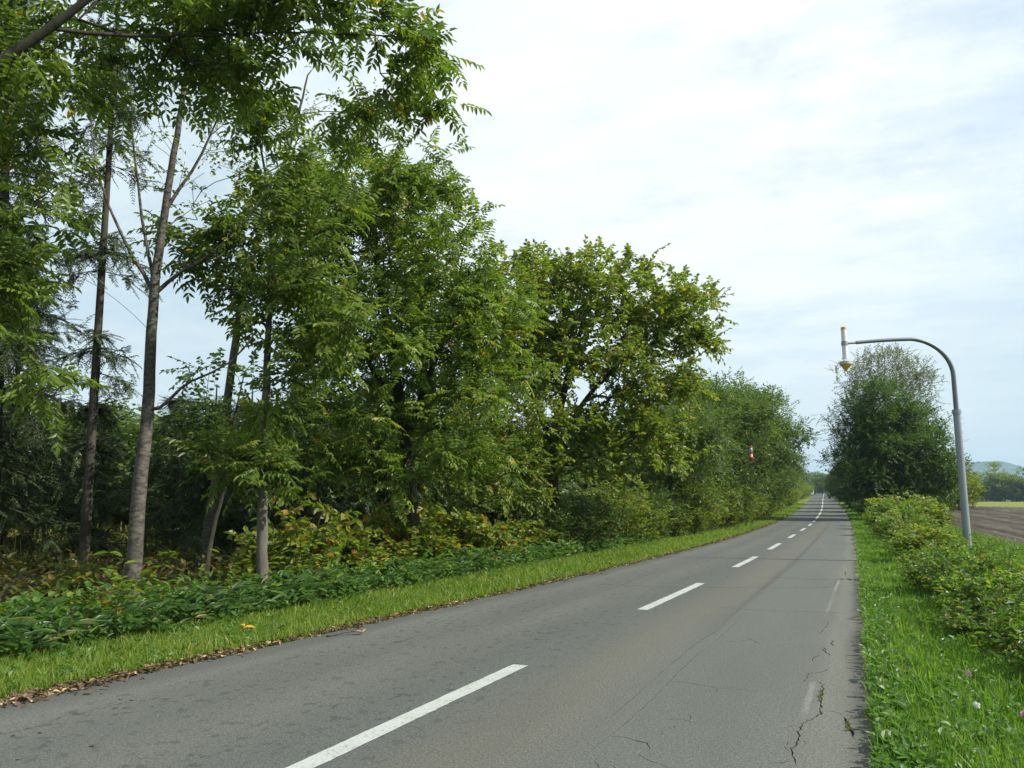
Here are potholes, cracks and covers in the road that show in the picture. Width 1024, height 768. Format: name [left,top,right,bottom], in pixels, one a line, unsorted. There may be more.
crack [585,607,855,768]
